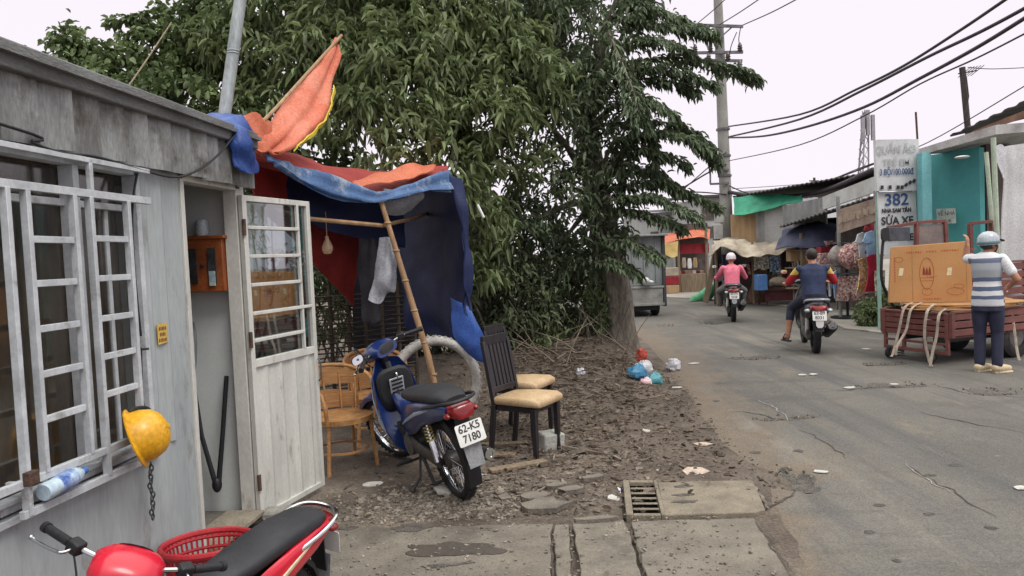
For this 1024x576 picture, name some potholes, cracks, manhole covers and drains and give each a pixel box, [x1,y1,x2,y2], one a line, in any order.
pothole [962,386,1022,396]
pothole [851,380,935,388]
drain grate [621,480,669,523]
pothole [758,464,821,494]
manhole cover [658,480,765,520]
crack [911,467,997,517]
crack [744,399,844,457]
